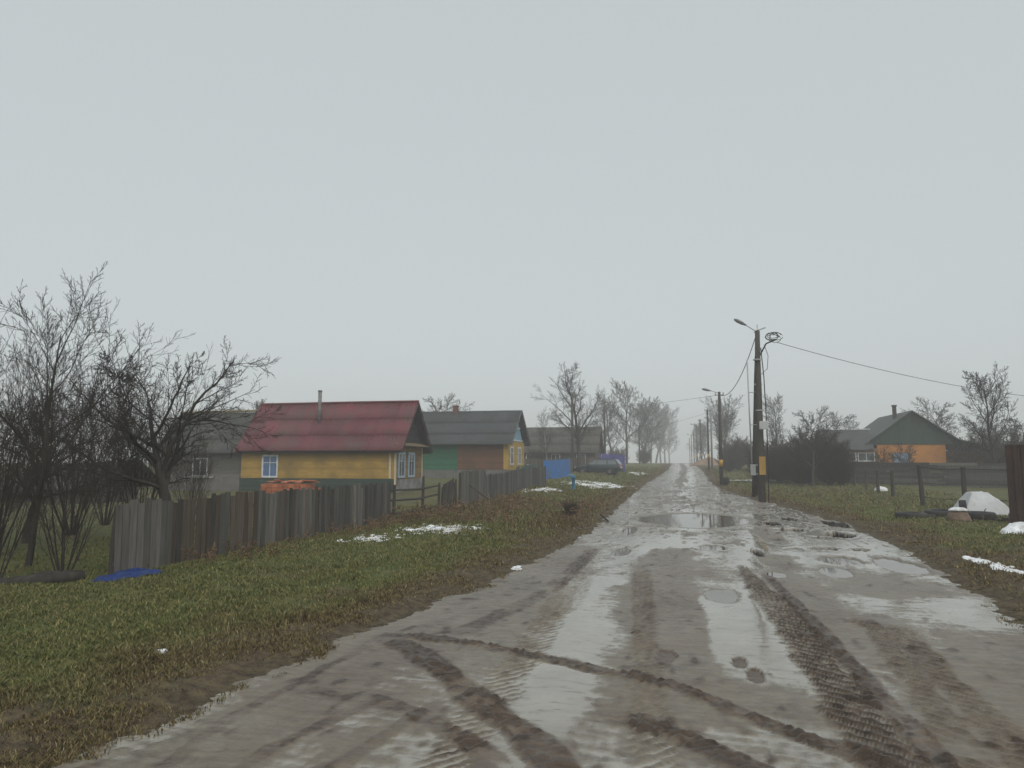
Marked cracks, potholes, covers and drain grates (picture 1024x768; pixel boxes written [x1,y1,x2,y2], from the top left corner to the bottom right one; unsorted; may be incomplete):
pothole [622,512,762,530]
pothole [814,565,857,578]
pothole [700,588,743,604]
pothole [730,656,749,669]
pothole [744,666,768,684]
